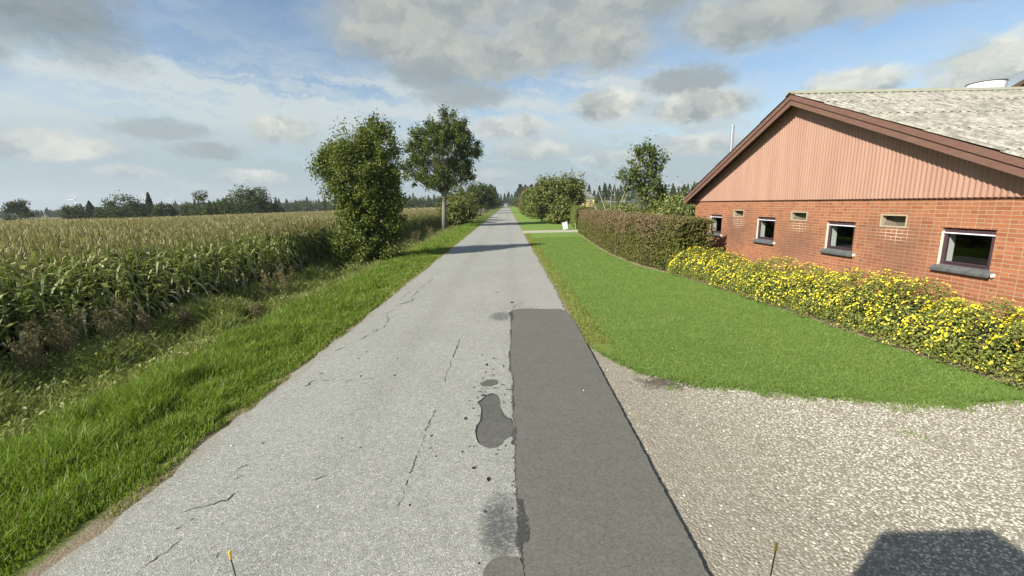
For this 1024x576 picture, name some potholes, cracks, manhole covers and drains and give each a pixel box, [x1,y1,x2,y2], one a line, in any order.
crack [134,464,248,576]
